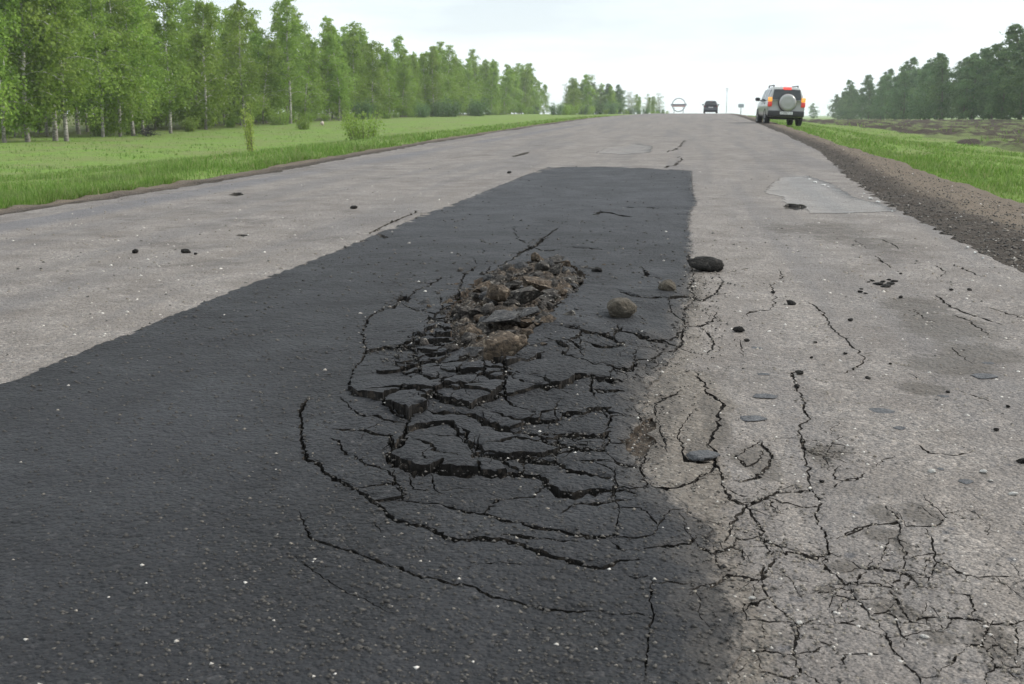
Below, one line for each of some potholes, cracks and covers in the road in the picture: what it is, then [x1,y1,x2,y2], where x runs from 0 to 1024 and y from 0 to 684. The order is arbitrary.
pothole [620,417,657,458]
crack [664,140,687,168]
crack [291,227,1024,684]
pothole [444,261,586,359]
